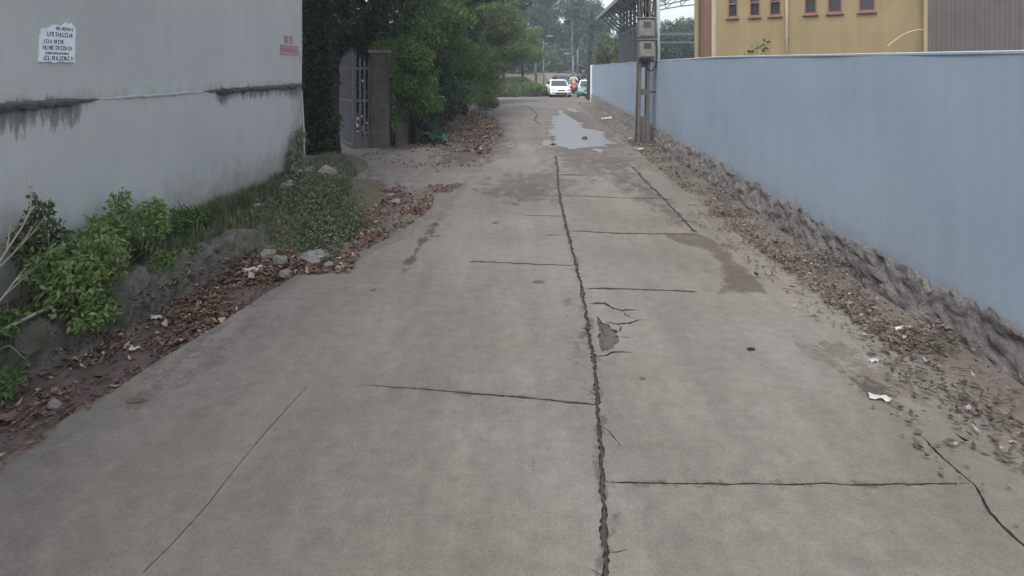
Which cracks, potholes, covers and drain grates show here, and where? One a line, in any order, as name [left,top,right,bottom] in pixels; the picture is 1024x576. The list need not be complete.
crack [370,157,1024,576]
pothole [597,317,619,352]
